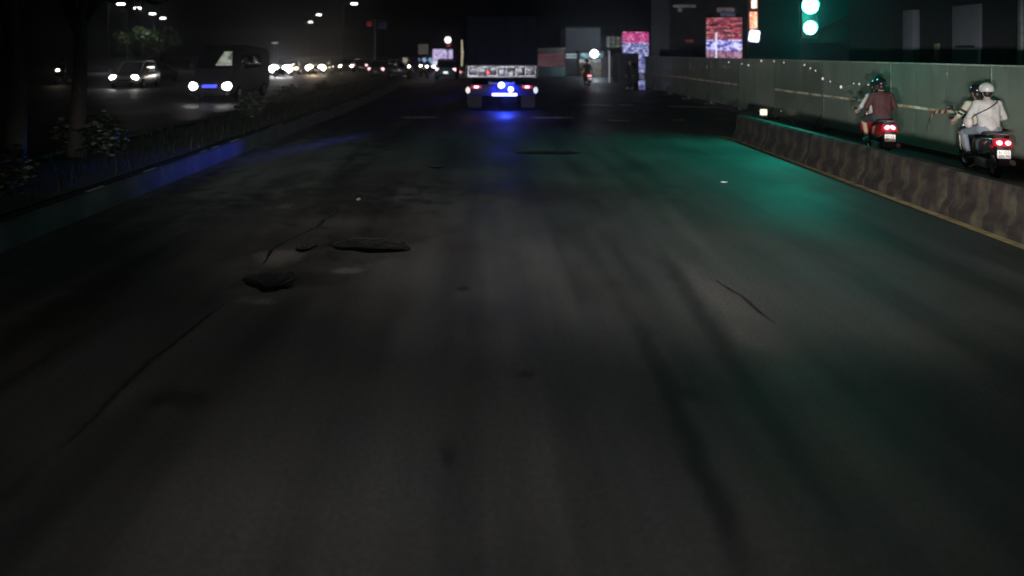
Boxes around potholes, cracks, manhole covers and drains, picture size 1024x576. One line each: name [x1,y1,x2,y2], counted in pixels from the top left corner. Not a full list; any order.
crack [261,209,338,265]
pothole [327,237,411,253]
crack [715,279,776,324]
crack [58,303,224,449]
pothole [241,271,298,293]
